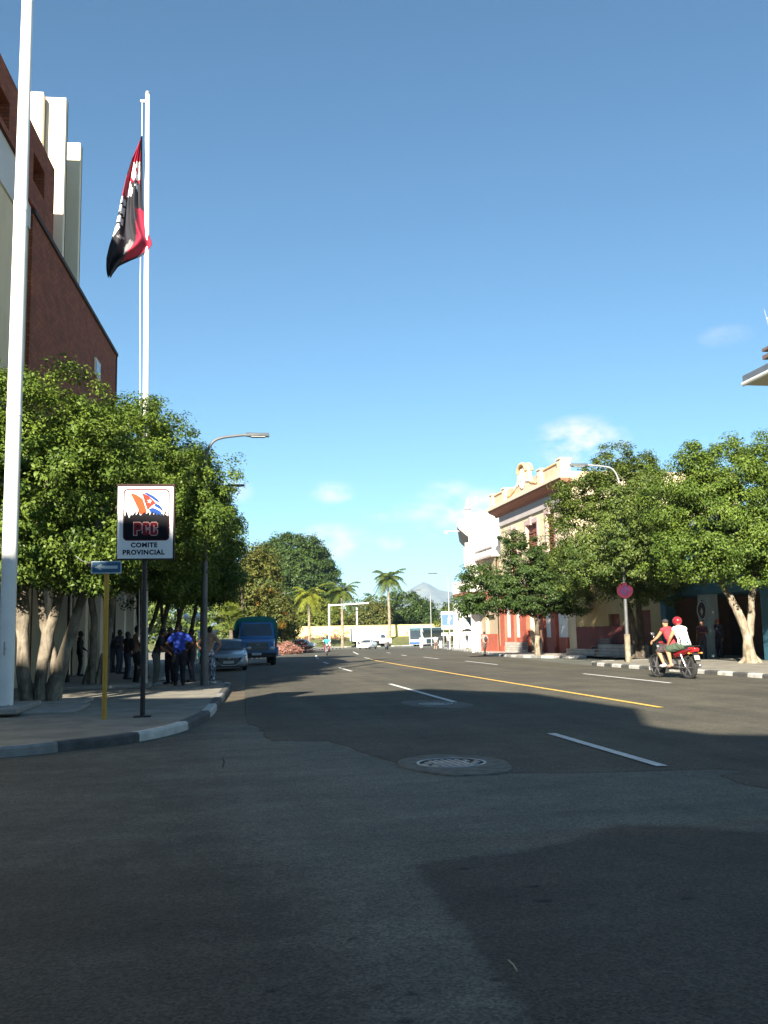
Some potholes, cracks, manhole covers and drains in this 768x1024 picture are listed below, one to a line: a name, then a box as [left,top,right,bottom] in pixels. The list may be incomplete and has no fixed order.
manhole cover [398,754,513,776]
manhole cover [401,700,474,708]
